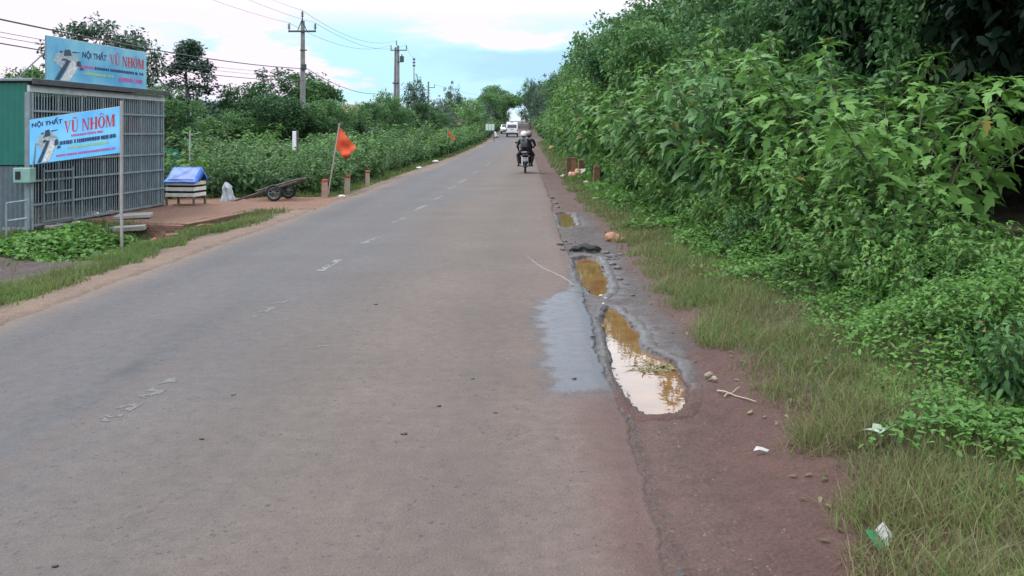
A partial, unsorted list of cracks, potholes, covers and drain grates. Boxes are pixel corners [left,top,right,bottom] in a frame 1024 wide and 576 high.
pothole [567,254,620,299]
pothole [553,211,583,228]
pothole [590,303,704,422]
